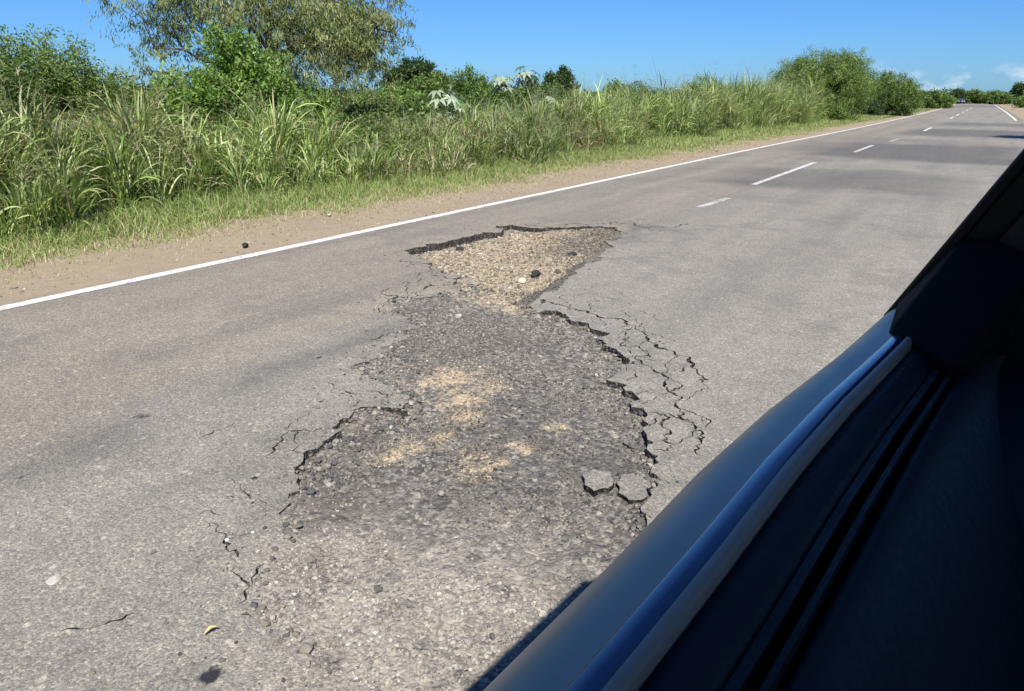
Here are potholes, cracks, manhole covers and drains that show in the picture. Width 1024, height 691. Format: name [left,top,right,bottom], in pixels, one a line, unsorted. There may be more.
crack [267,412,335,456]
pothole [404,225,623,306]
crack [60,613,134,632]
pothole [240,285,660,691]
crack [539,293,712,495]
crack [198,478,266,604]
